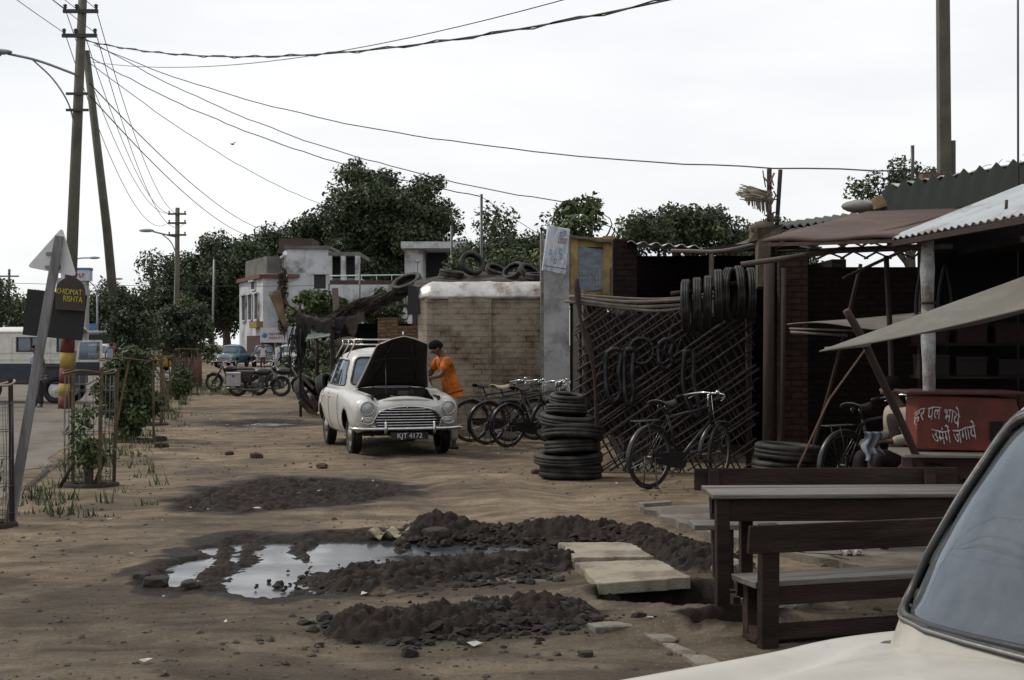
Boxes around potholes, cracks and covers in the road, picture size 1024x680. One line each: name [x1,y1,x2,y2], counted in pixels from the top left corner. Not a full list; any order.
pothole [101,525,558,609]
pothole [198,418,323,428]
